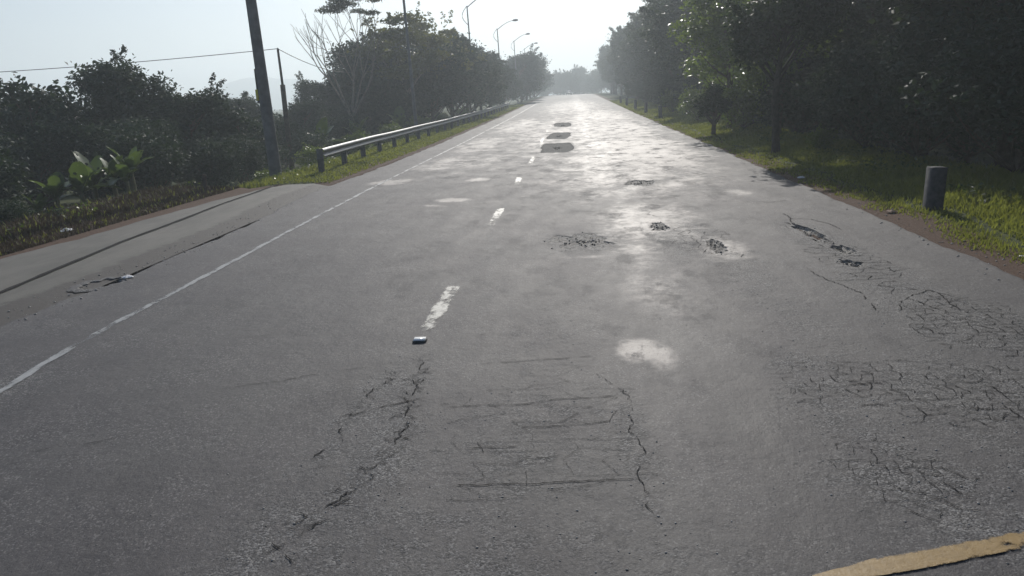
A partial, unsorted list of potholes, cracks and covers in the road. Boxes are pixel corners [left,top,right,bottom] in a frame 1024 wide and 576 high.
pothole [538,231,626,252]
crack [753,201,1024,428]
pothole [614,179,665,187]
pothole [640,221,681,233]
crack [349,355,658,522]
crack [830,433,981,523]
pothole [697,237,737,256]
